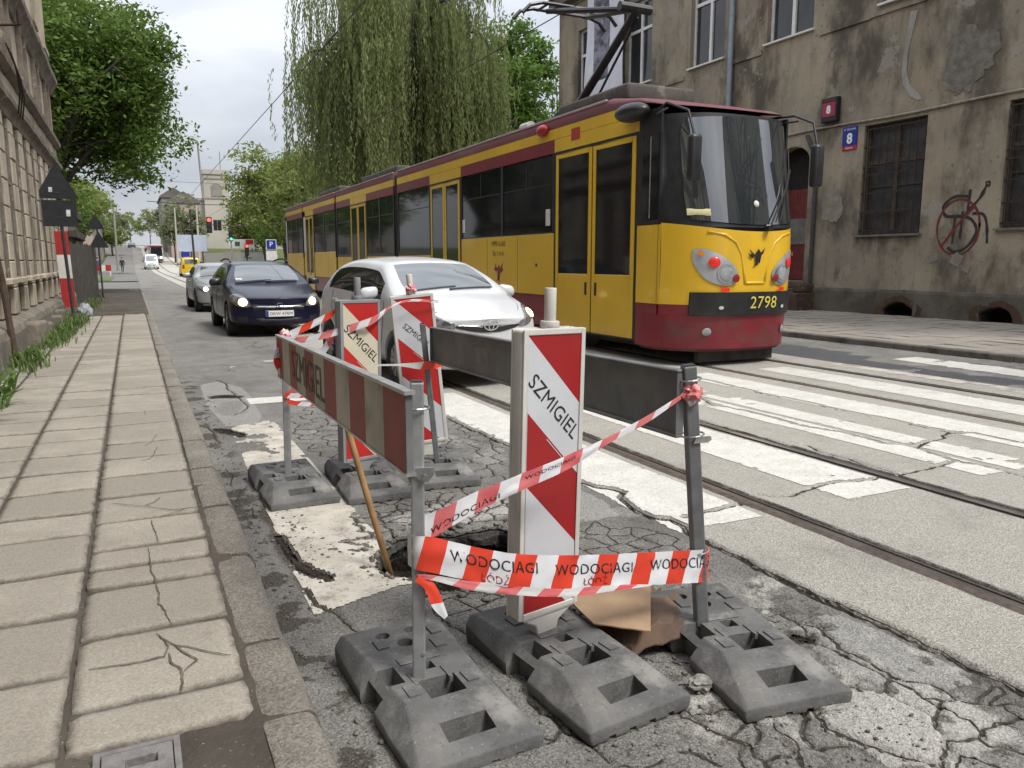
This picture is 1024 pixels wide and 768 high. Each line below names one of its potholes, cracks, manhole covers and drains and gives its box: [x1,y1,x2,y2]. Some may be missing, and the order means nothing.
pothole [379,529,508,592]
crack [88,497,229,691]
manhole cover [92,734,183,768]
crack [290,407,1024,768]
crack [182,340,267,416]
